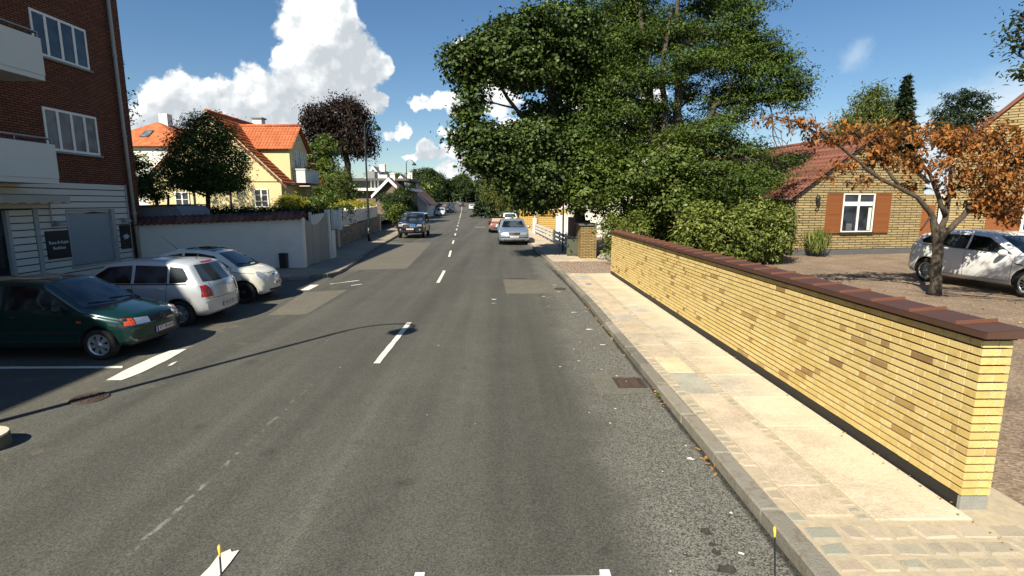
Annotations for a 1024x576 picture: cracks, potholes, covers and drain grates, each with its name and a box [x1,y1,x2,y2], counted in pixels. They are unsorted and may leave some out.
manhole cover [68,392,110,404]
